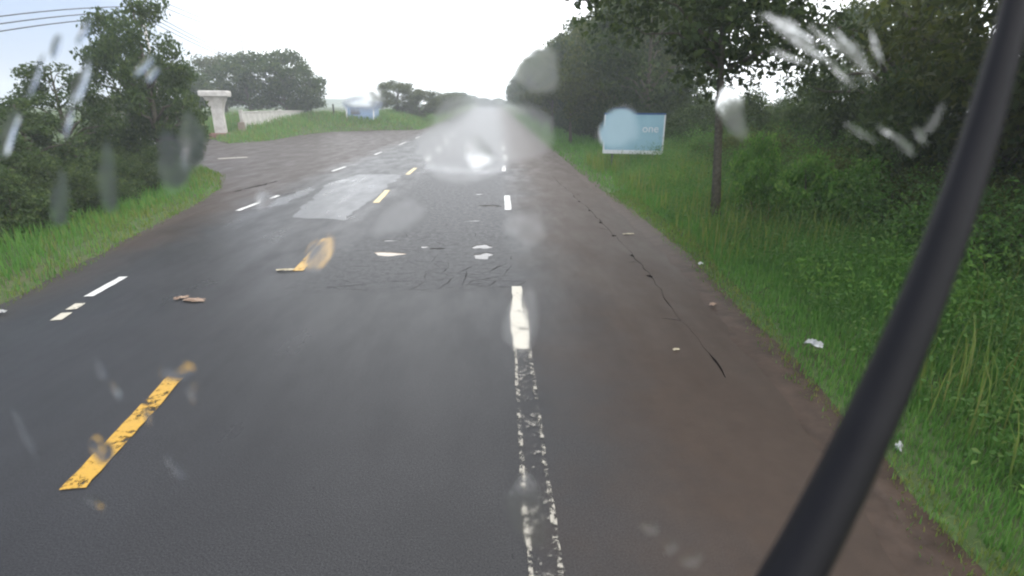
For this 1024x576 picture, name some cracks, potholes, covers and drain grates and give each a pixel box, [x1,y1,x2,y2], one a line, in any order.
crack [556,180,726,378]
crack [333,232,523,290]
